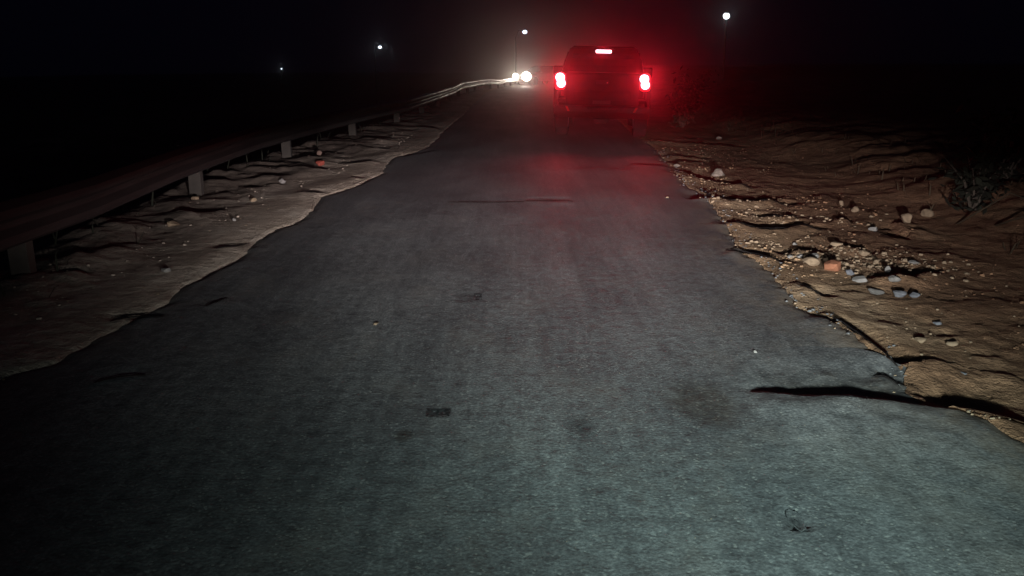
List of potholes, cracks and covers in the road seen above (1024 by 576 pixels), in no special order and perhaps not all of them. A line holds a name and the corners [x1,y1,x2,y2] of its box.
pothole [452,290,482,304]
pothole [425,408,452,417]
